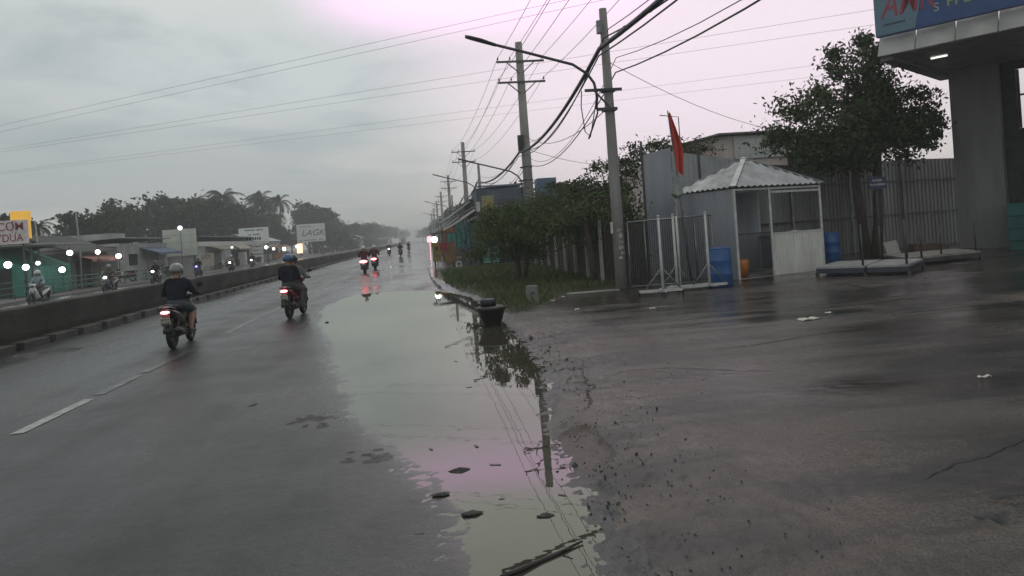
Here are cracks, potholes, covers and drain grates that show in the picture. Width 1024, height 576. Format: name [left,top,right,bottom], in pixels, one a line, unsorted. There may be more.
crack [924,439,1024,479]
crack [534,329,752,410]
pothole [286,412,347,429]
pothole [340,448,393,465]
